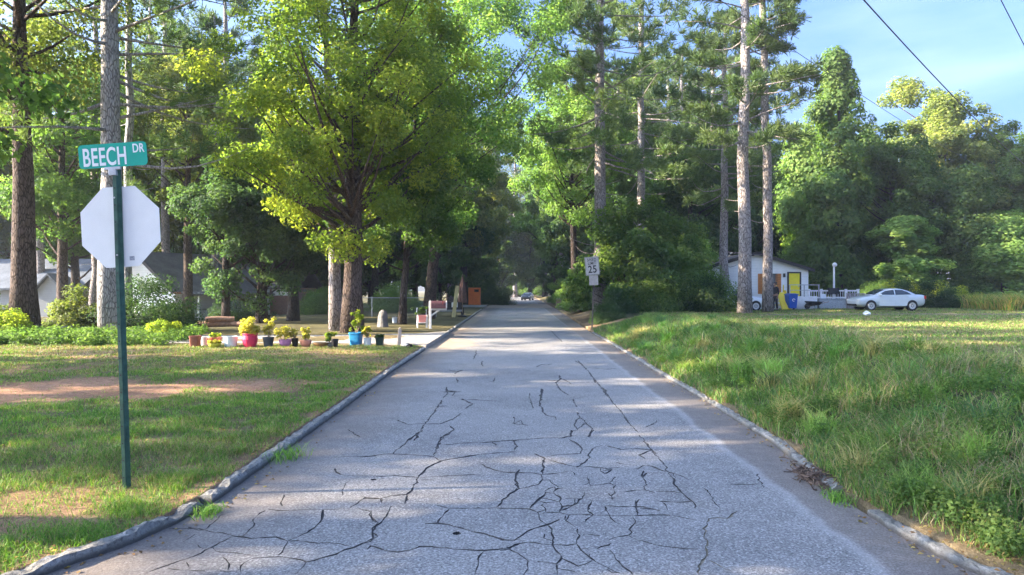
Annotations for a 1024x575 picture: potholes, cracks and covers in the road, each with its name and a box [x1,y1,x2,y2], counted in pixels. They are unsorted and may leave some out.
crack [529,364,571,420]
crack [696,489,737,575]
crack [147,389,694,575]
